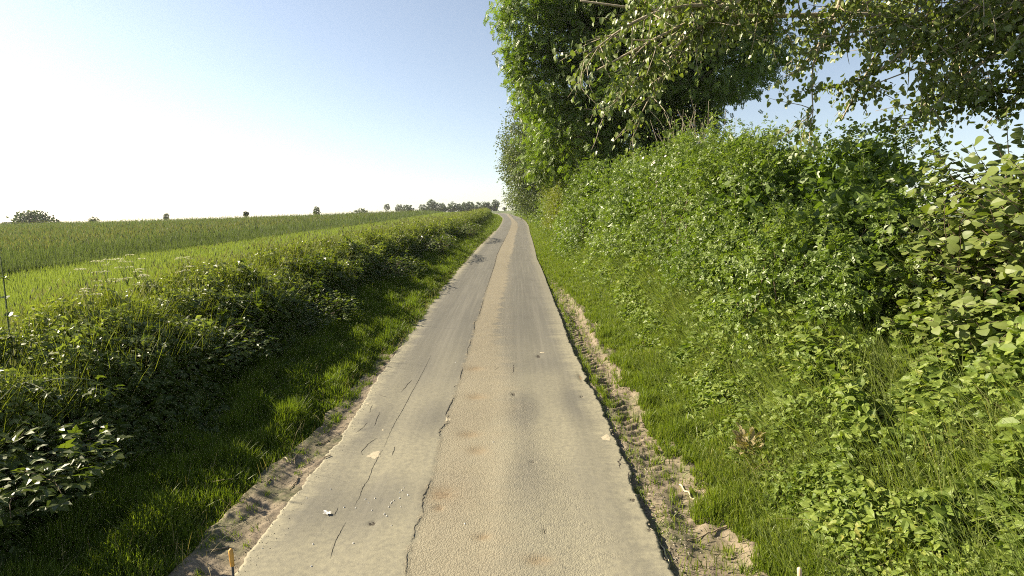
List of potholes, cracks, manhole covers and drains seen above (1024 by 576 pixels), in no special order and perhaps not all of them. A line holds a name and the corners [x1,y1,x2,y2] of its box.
crack [355,364,427,504]
